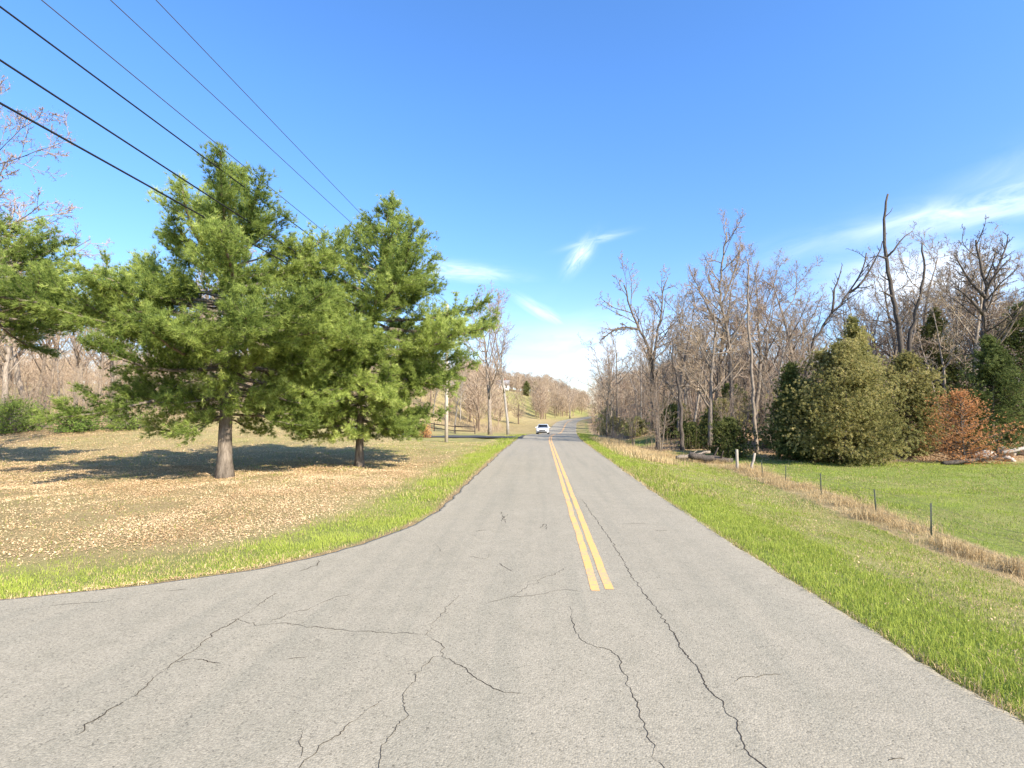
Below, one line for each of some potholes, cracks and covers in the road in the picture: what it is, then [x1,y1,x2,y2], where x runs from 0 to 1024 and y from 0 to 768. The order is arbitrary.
crack [76,593,522,768]
crack [581,499,772,768]
